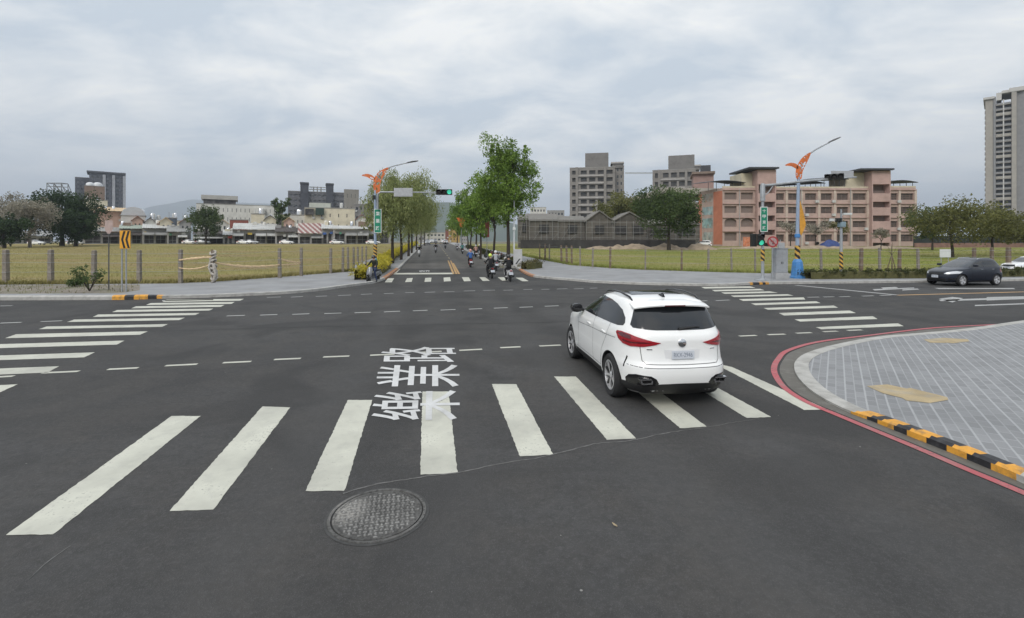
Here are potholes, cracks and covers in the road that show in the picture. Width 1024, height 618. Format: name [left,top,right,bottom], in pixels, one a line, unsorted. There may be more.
manhole cover [324,488,429,546]
